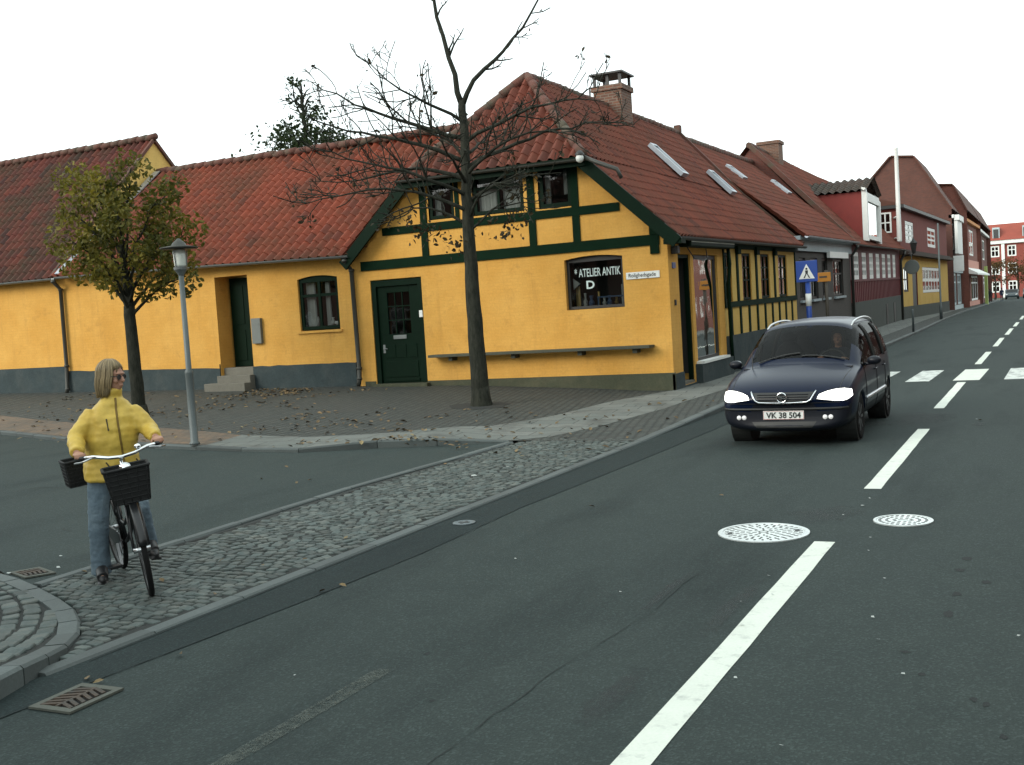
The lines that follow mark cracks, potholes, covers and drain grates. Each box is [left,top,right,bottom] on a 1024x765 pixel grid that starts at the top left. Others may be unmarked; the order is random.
crack [427,570,703,765]
drain grate [28,683,124,714]
manhole cover [873,514,934,527]
manhole cover [718,523,810,543]
drain grate [10,567,56,579]
